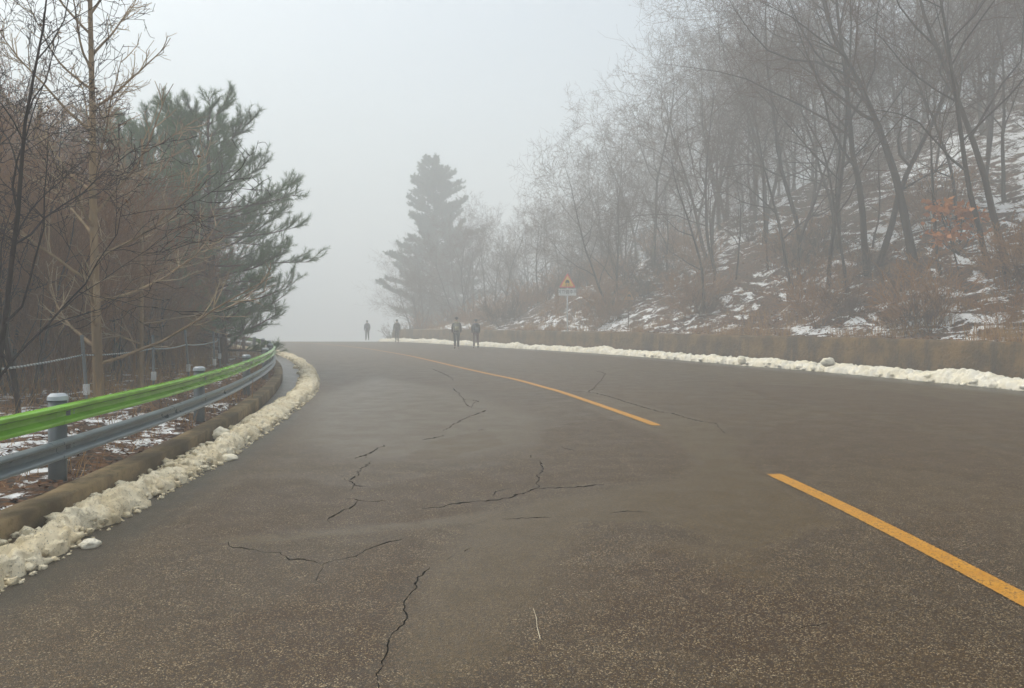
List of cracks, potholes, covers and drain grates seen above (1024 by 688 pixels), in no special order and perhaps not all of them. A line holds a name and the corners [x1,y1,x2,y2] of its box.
crack [376,567,430,688]
crack [228,539,401,586]
crack [424,455,602,509]
crack [589,371,725,433]
crack [327,445,384,523]
crack [424,369,486,440]
